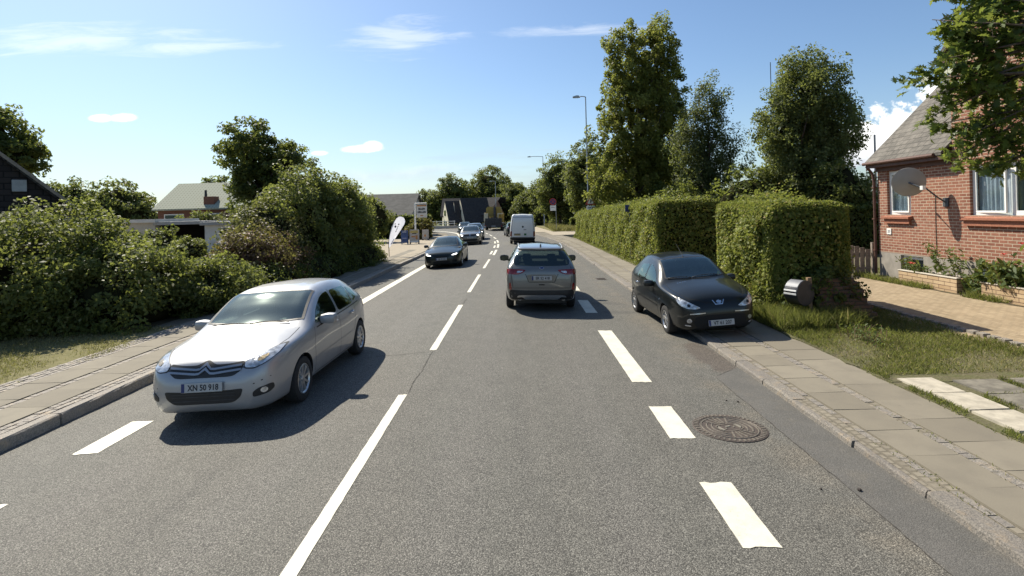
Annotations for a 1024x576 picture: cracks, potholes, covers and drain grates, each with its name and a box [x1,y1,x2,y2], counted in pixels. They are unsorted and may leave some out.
manhole cover [692,414,769,443]
